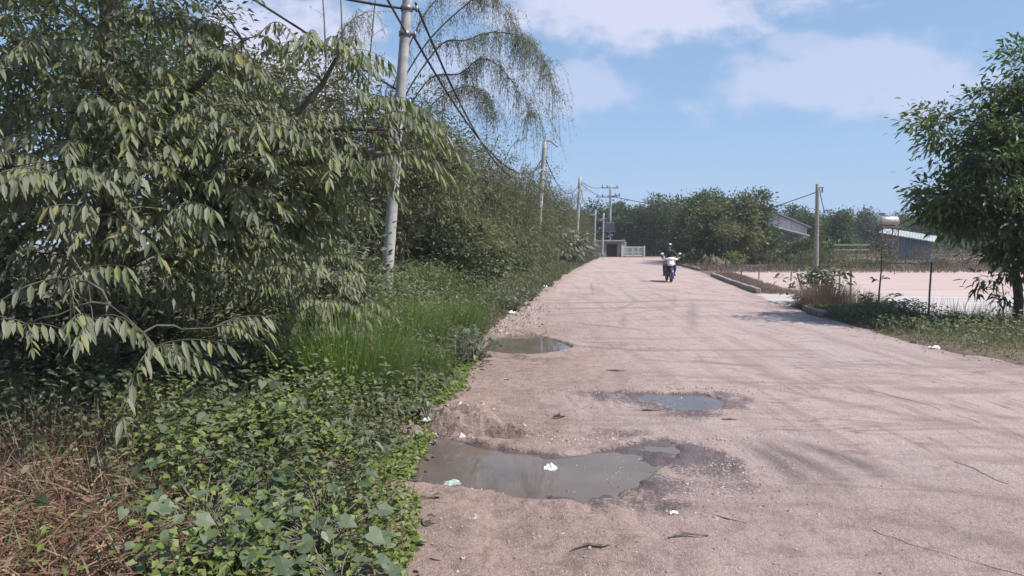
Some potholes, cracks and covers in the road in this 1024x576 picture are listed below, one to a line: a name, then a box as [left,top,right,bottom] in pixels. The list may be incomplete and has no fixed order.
pothole [599,386,755,418]
pothole [481,334,589,358]
pothole [350,430,716,519]
